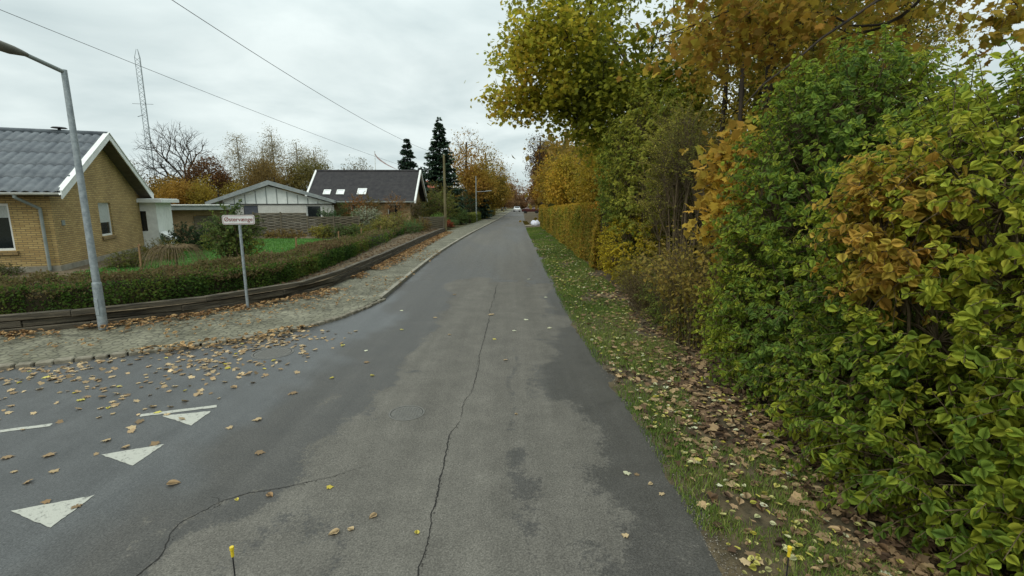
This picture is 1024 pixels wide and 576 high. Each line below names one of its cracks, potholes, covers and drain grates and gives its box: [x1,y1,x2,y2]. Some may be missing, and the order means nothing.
manhole cover [251,347,294,359]
crack [417,289,496,576]
manhole cover [388,405,425,421]
crack [136,469,355,576]
